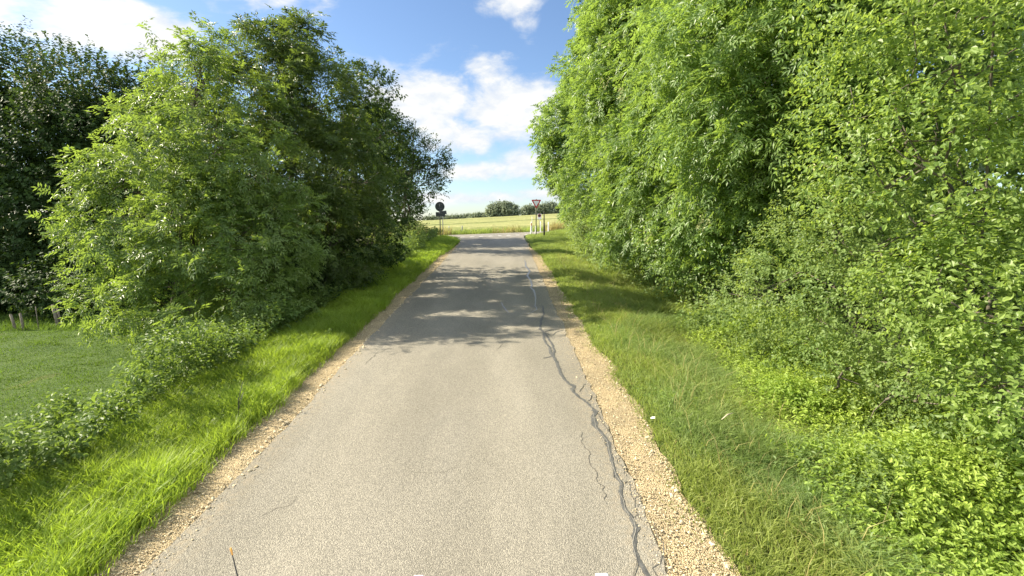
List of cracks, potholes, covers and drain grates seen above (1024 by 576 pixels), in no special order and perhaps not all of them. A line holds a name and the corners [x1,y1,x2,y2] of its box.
crack [614,456,668,576]
